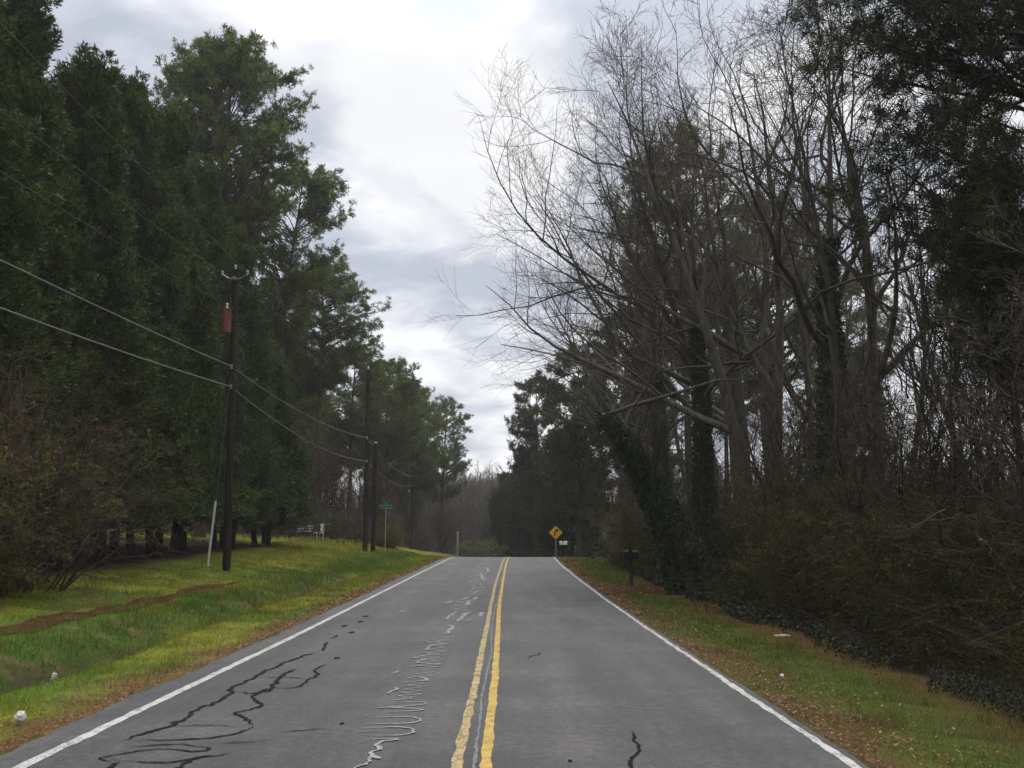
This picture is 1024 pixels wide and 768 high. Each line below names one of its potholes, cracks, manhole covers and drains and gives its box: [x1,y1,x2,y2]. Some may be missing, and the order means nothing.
crack [354,567,489,768]
crack [99,635,338,768]
crack [628,731,641,768]
